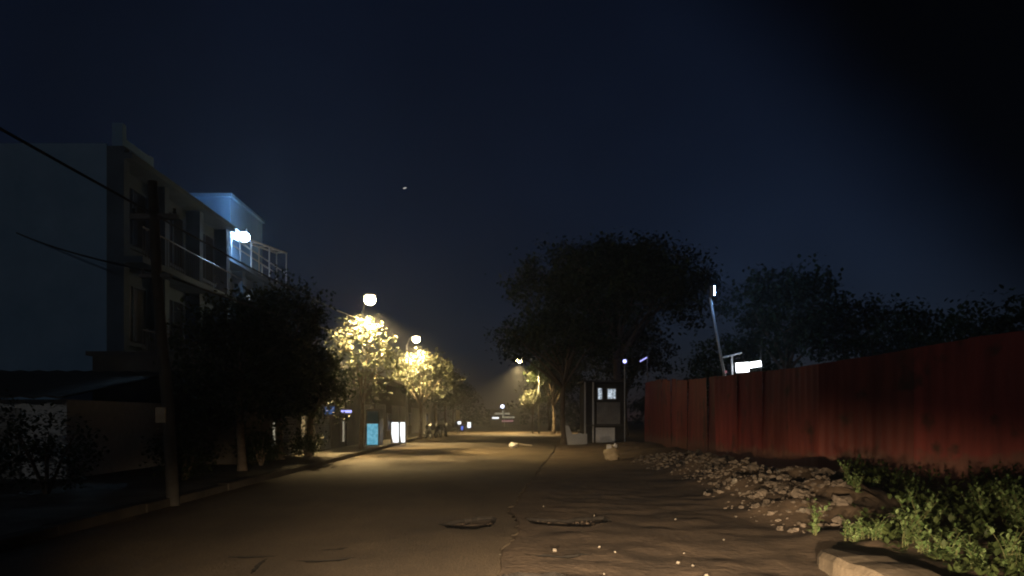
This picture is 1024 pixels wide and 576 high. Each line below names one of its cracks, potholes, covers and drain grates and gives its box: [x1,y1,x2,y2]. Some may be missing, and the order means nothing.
crack [297,548,356,562]
pothole [526,516,613,527]
crack [236,556,270,574]
pothole [439,516,497,530]
